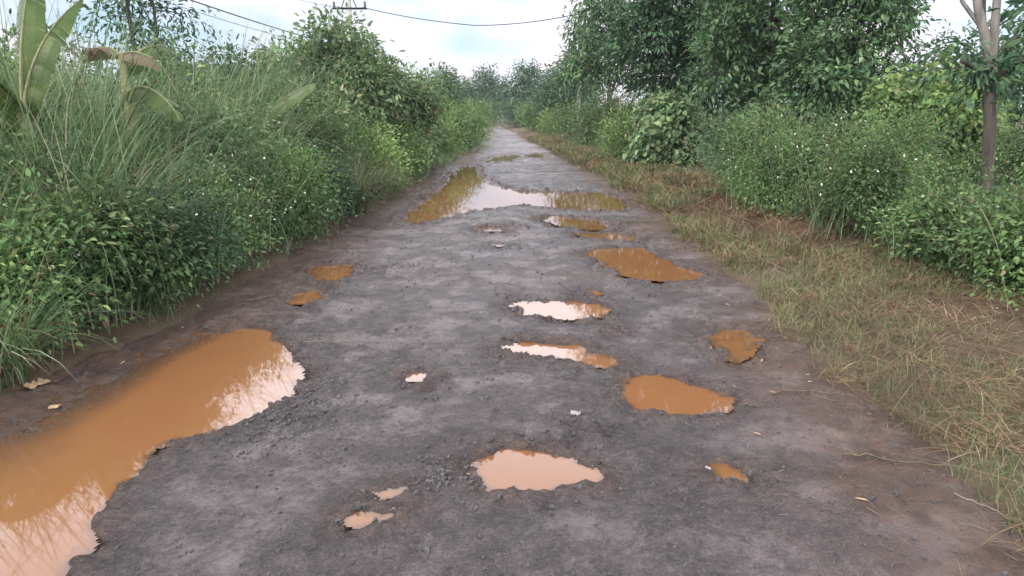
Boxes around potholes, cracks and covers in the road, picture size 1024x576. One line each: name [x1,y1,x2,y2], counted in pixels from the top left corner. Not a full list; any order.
pothole [703,456,749,483]
pothole [477,223,504,233]
pothole [0,321,307,576]
pothole [400,368,433,383]
pothole [305,261,363,284]
pothole [466,439,611,492]
pothole [709,330,766,366]
pothole [499,334,629,370]
pothole [285,289,326,307]
pothole [372,486,410,500]
pothole [574,232,643,242]
pothole [582,245,706,284]
